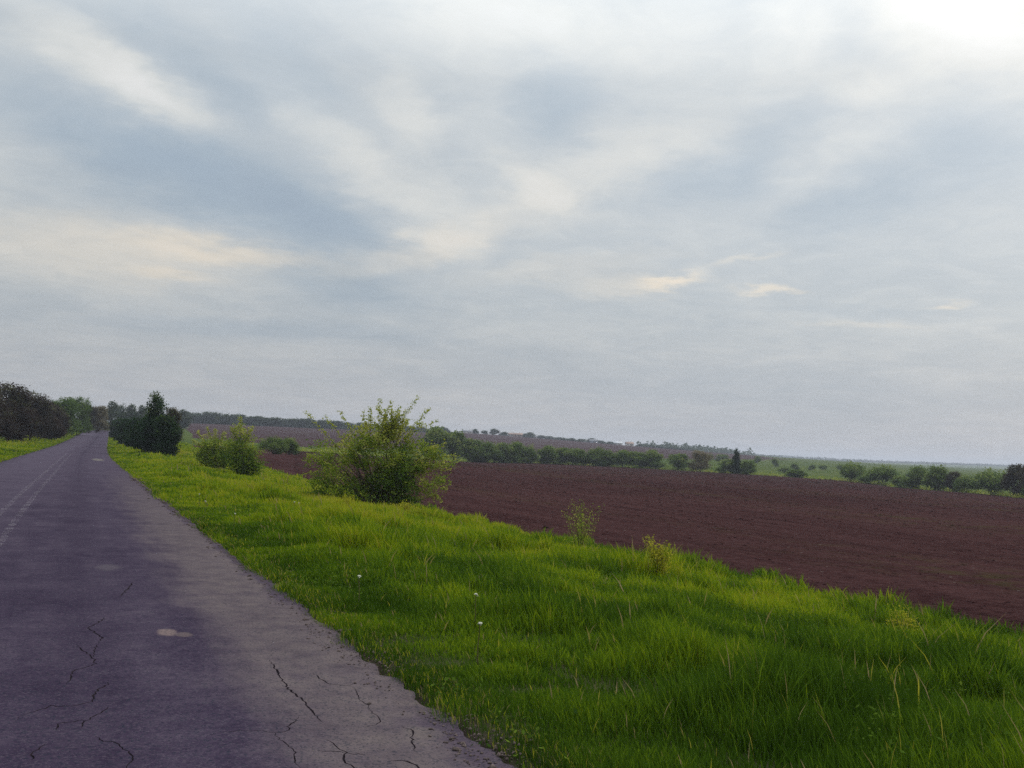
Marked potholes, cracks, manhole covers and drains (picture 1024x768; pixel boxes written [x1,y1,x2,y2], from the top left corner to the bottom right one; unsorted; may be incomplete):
crack [215,660,381,768]
crack [15,619,134,768]
